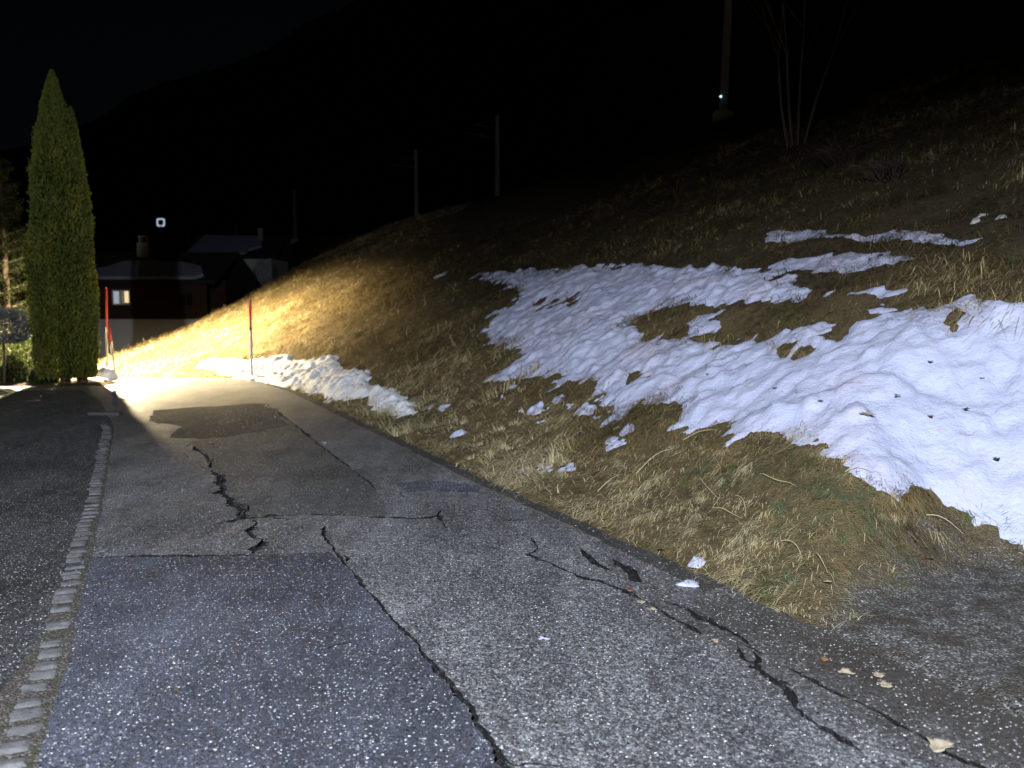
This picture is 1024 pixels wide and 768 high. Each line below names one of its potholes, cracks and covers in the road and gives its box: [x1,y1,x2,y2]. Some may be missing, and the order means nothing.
crack [184,443,987,768]
